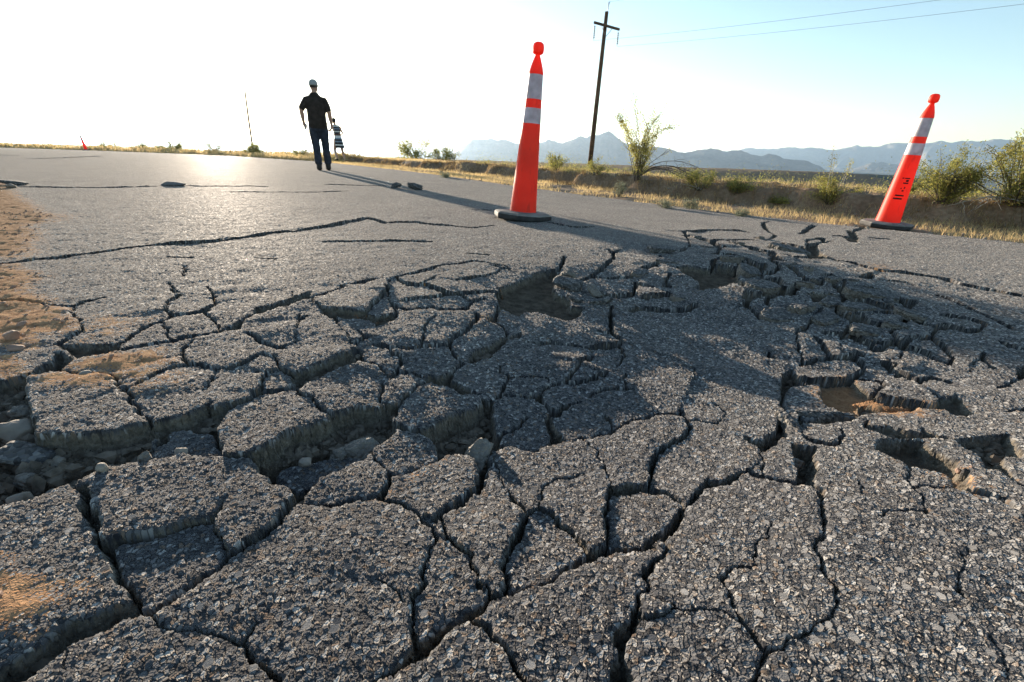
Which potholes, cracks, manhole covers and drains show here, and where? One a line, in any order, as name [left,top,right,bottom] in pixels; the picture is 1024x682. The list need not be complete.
crack [18,184,380,193]
pothole [675,265,747,291]
pothole [873,437,977,494]
pothole [497,270,585,321]
crack [0,209,1024,682]
pothole [821,380,920,417]
